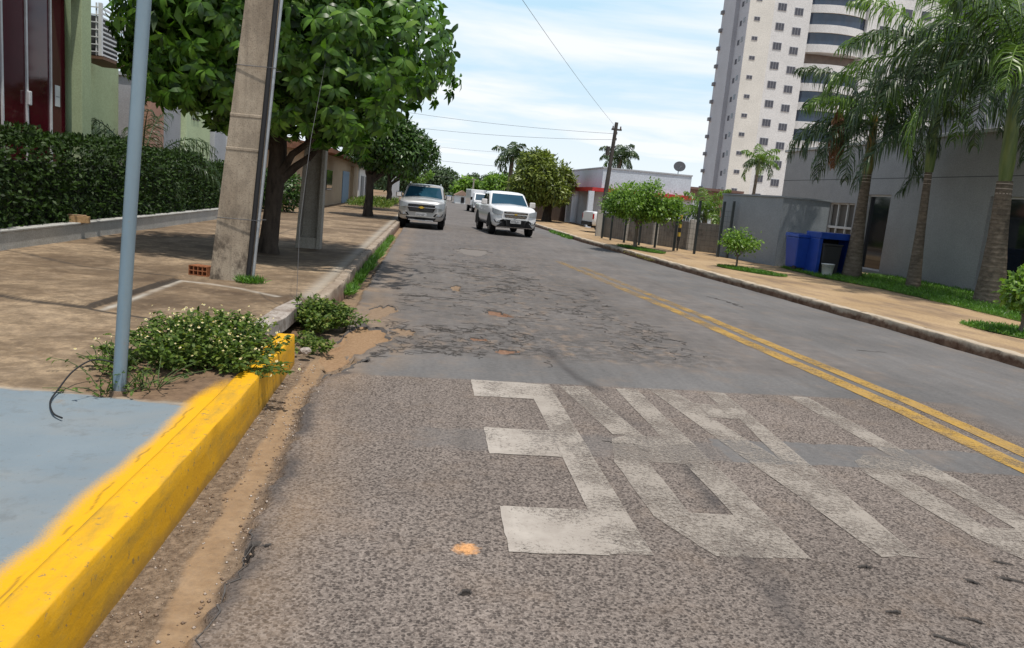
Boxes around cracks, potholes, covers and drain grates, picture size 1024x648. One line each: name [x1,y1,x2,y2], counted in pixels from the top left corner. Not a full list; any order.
crack [321,252,704,380]
pothole [456,588,476,600]
pothole [364,305,400,323]
pothole [492,348,523,356]
crack [195,529,254,648]
pothole [485,310,515,319]
